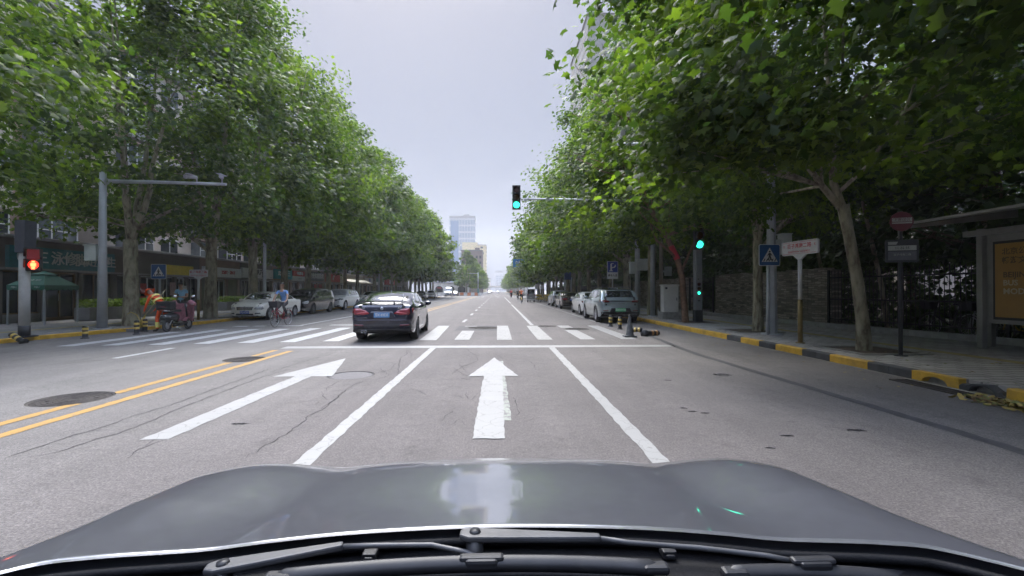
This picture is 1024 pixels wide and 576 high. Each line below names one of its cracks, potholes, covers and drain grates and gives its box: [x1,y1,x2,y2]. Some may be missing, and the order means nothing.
crack [11,354,336,458]
manhole cover [327,371,375,380]
crack [246,351,426,458]
manhole cover [24,391,116,407]
